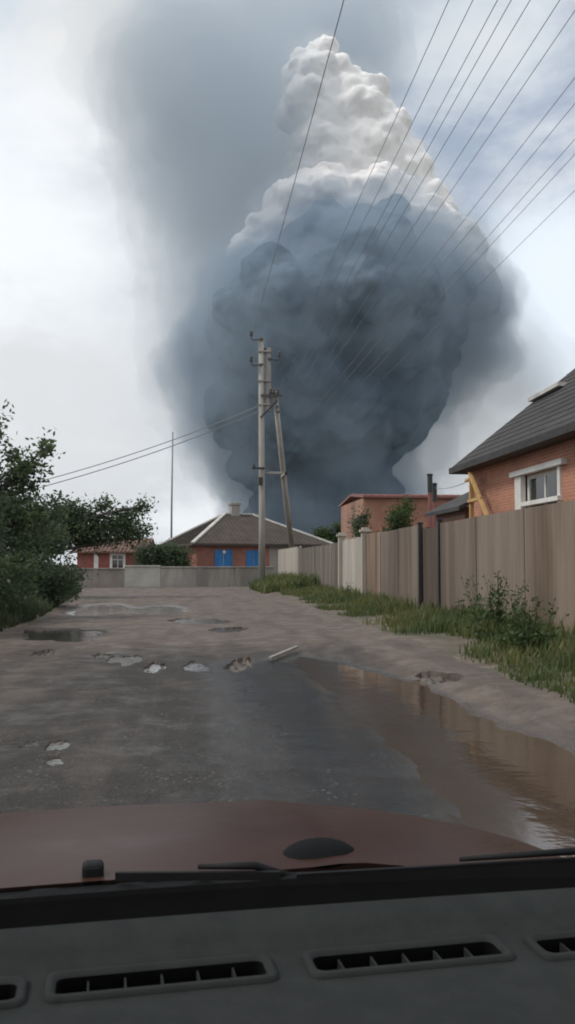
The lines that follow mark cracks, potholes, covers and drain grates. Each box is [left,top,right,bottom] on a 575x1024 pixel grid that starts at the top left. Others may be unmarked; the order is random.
pothole [412,671,464,685]
pothole [44,740,72,751]
pothole [44,756,66,766]
pothole [19,628,108,642]
pothole [182,660,211,672]
pothole [105,655,144,666]
pothole [223,656,254,672]
pothole [143,662,167,673]
